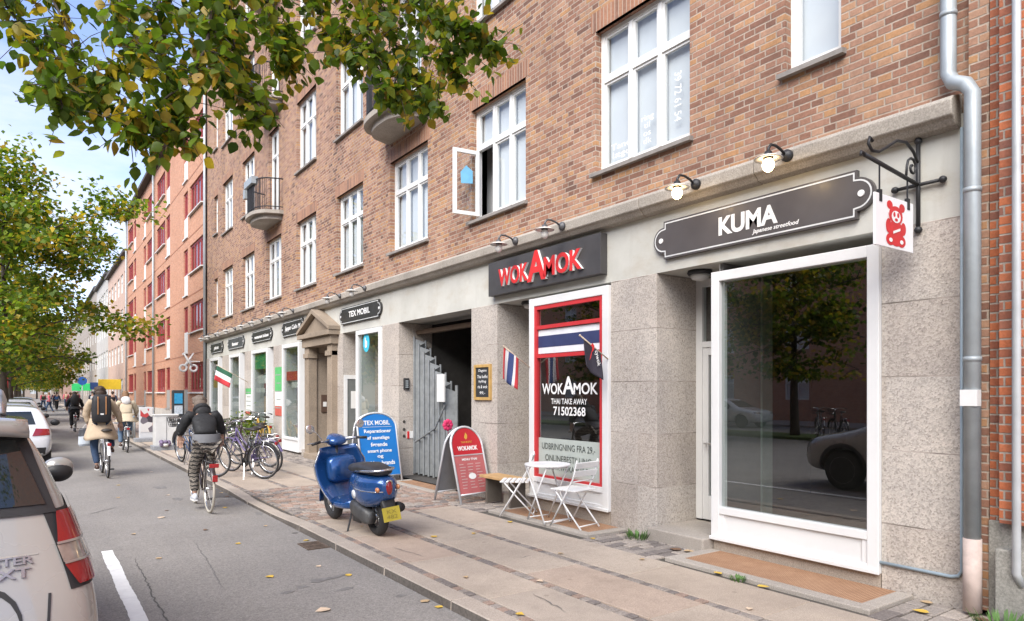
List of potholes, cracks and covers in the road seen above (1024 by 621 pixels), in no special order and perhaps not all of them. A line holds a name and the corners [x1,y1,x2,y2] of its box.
crack [135,557,169,621]
